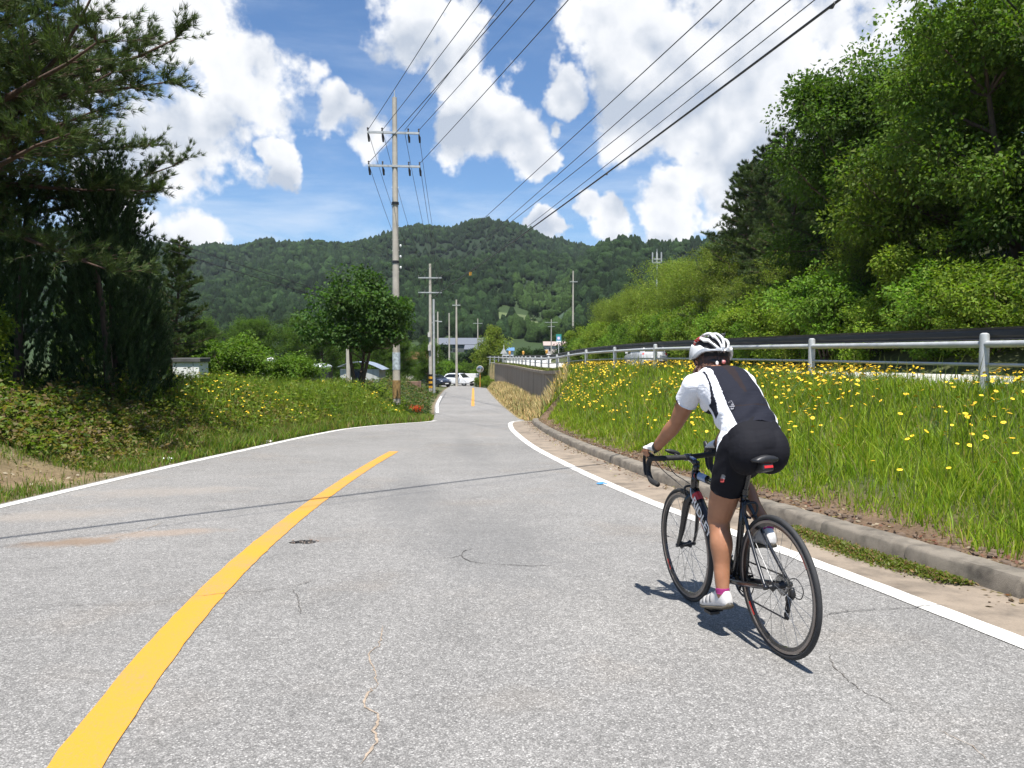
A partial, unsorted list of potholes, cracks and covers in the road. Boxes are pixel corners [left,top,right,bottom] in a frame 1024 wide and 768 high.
crack [50,580,311,613]
crack [362,625,383,762]
